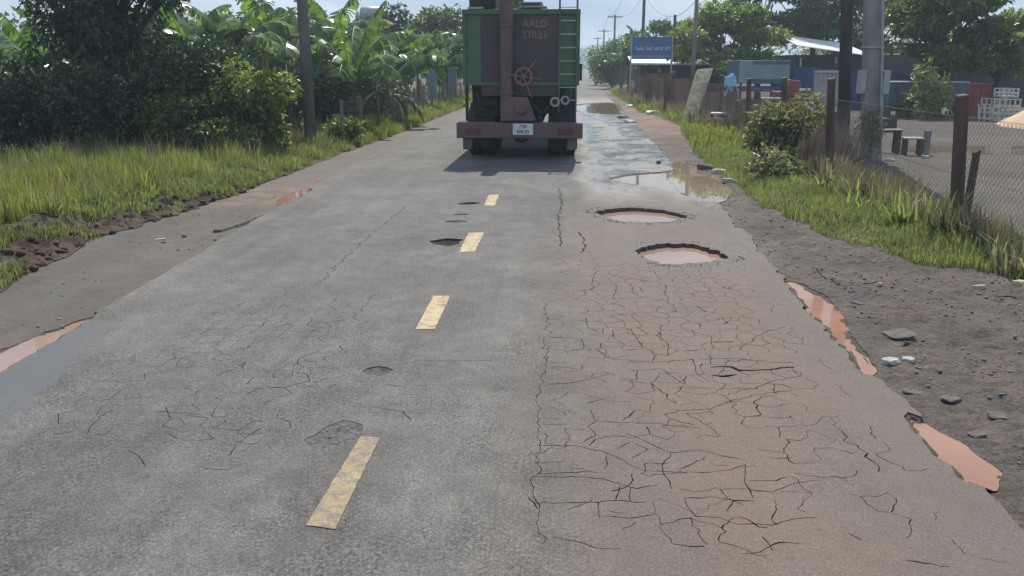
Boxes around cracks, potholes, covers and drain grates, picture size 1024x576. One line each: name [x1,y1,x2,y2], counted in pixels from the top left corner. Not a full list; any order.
pothole [430,238,463,246]
crack [556,188,587,253]
pothole [634,243,728,264]
pothole [904,412,1003,493]
pothole [276,189,312,206]
pothole [596,208,687,223]
crack [527,258,998,567]
pothole [0,315,95,372]
crack [35,296,392,470]
pothole [362,366,393,376]
pothole [784,281,879,376]
